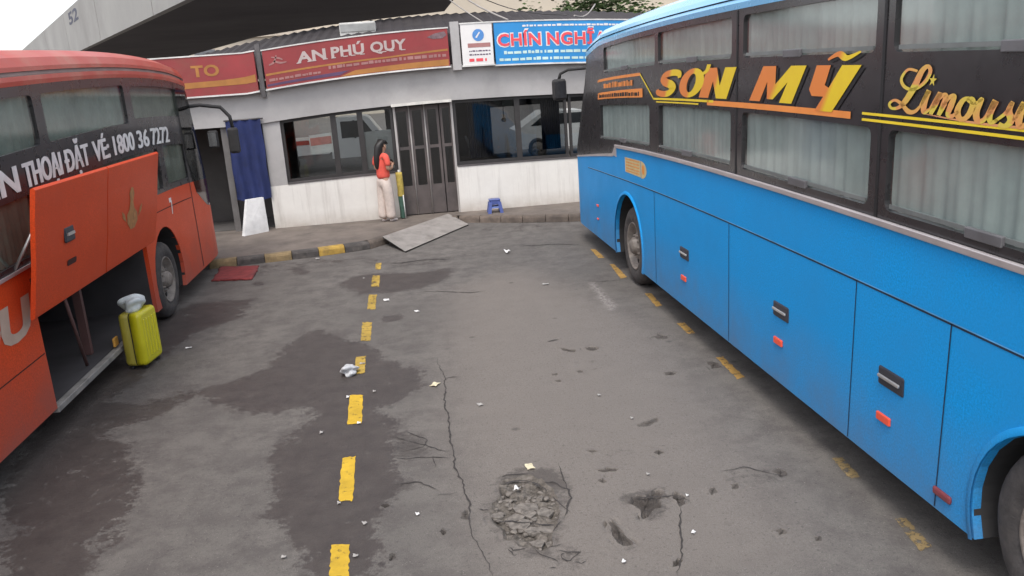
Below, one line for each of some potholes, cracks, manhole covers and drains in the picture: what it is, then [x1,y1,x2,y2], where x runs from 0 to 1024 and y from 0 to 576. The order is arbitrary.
crack [392,358,585,576]
pothole [483,472,566,556]
crack [635,495,690,572]
